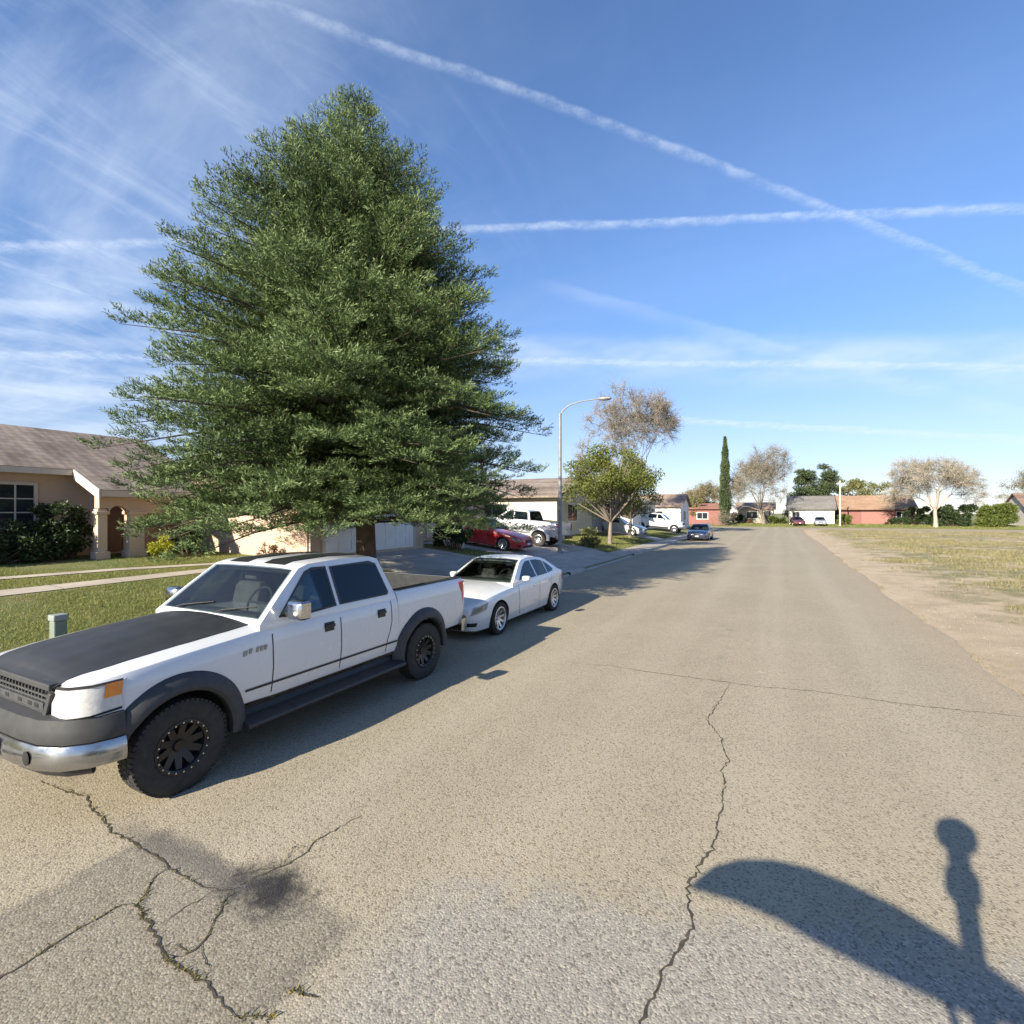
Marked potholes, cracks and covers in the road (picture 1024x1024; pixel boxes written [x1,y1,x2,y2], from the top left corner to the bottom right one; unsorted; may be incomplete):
crack [0,780,360,1024]
crack [569,661,1022,1024]
